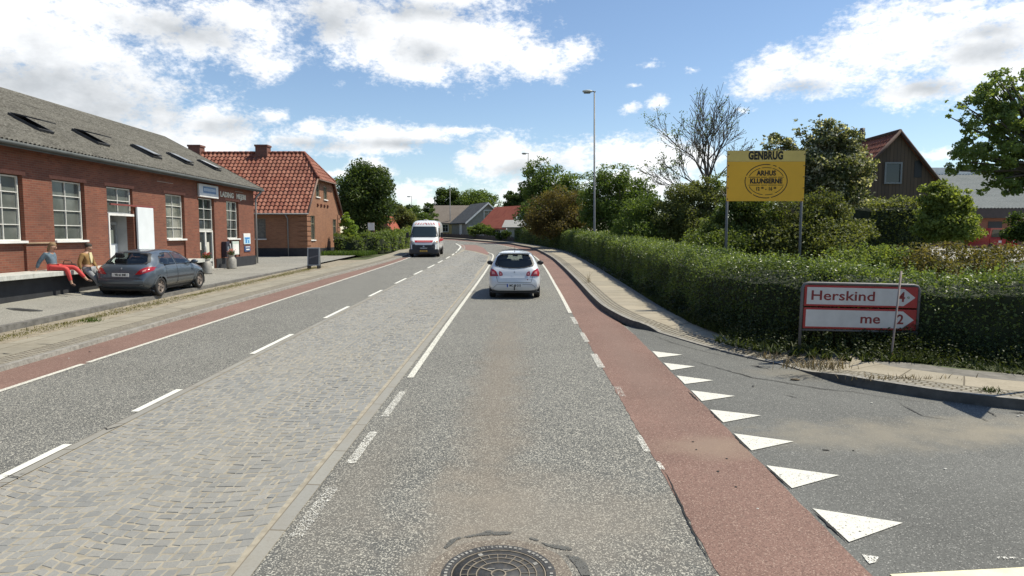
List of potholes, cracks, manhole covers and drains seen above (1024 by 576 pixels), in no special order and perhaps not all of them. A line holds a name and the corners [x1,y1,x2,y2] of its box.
manhole cover [441,545,556,576]
